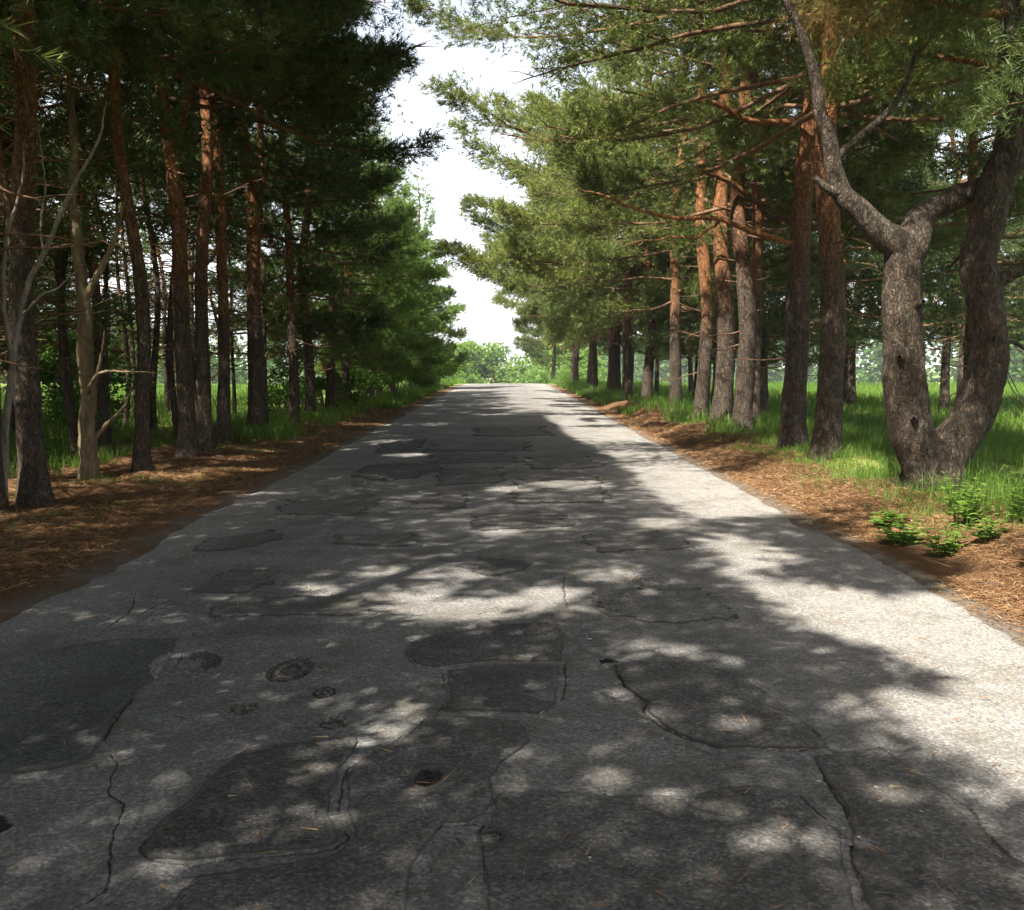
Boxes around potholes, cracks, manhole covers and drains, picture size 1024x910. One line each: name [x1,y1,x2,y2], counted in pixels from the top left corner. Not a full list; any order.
pothole [147,645,233,684]
crack [0,577,1024,910]
pothole [259,655,320,685]
pothole [306,684,343,702]
pothole [216,698,269,720]
pothole [300,712,361,734]
pothole [407,762,450,792]
